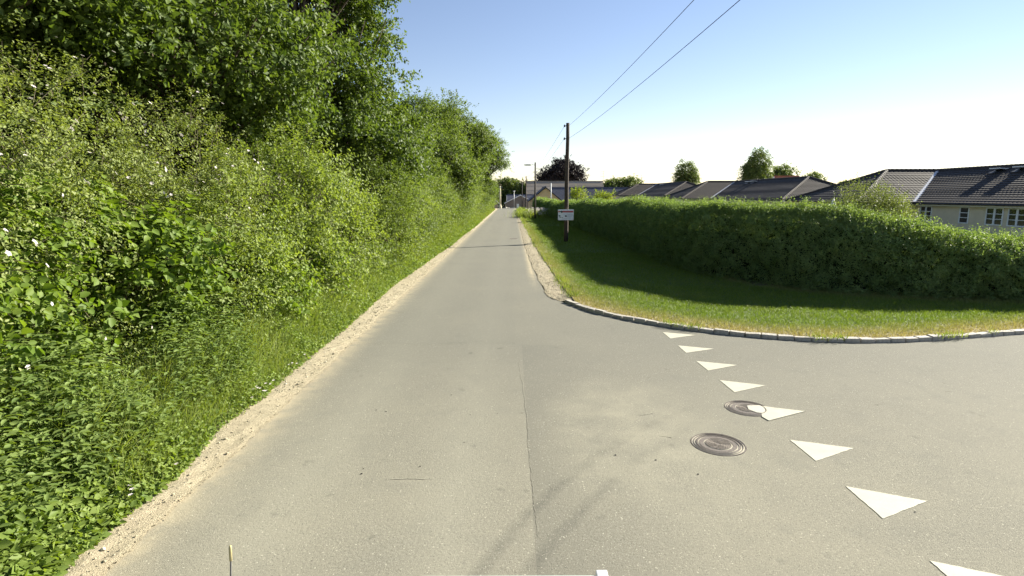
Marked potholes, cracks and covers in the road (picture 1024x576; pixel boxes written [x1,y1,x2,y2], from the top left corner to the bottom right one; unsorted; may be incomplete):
manhole cover [724,400,766,417]
manhole cover [691,433,747,456]
